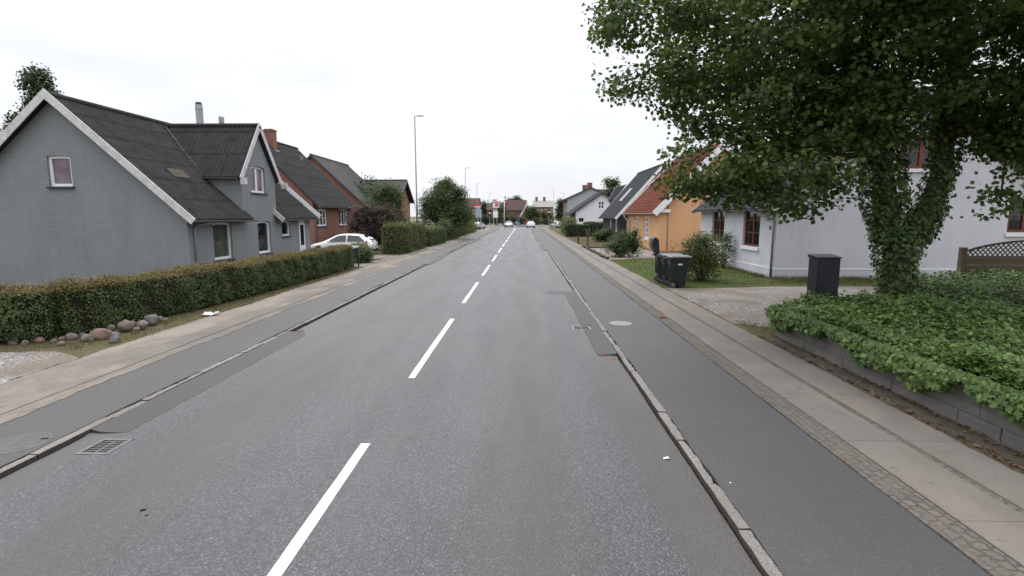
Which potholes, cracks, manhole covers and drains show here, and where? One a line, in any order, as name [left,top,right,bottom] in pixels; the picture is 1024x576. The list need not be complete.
drain grate [74,438,134,455]
manhole cover [0,432,54,455]
